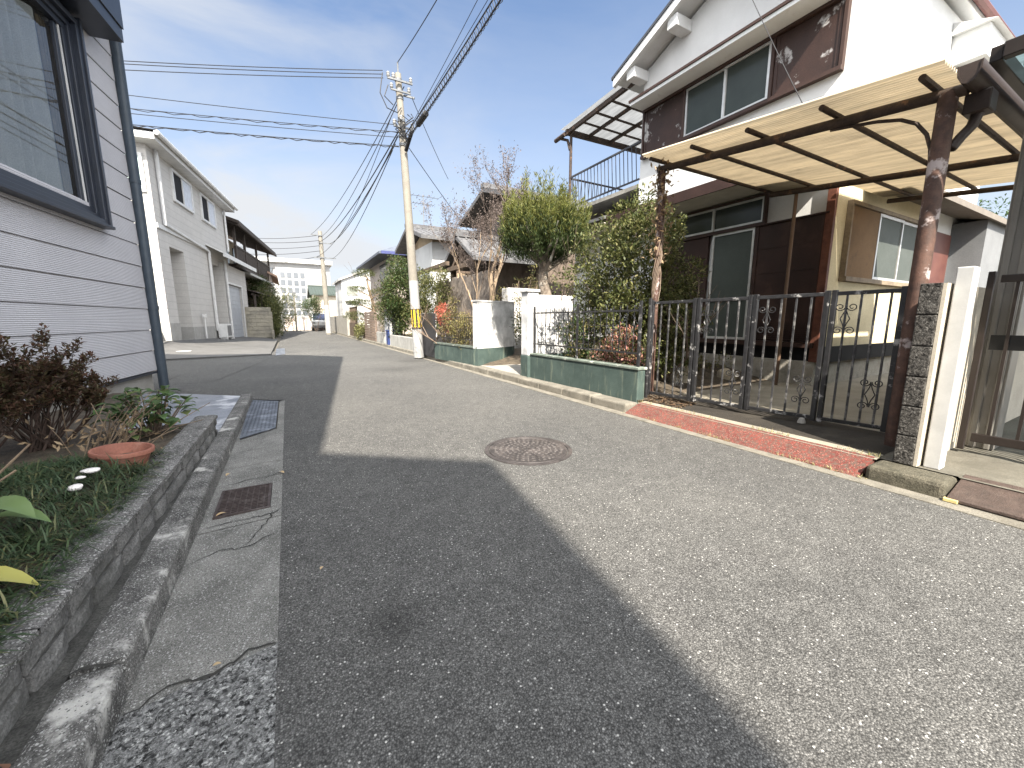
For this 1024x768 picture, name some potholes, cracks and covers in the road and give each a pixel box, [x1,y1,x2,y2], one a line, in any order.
crack [62,642,276,715]
manhole cover [485,436,572,466]
crack [188,509,279,565]
